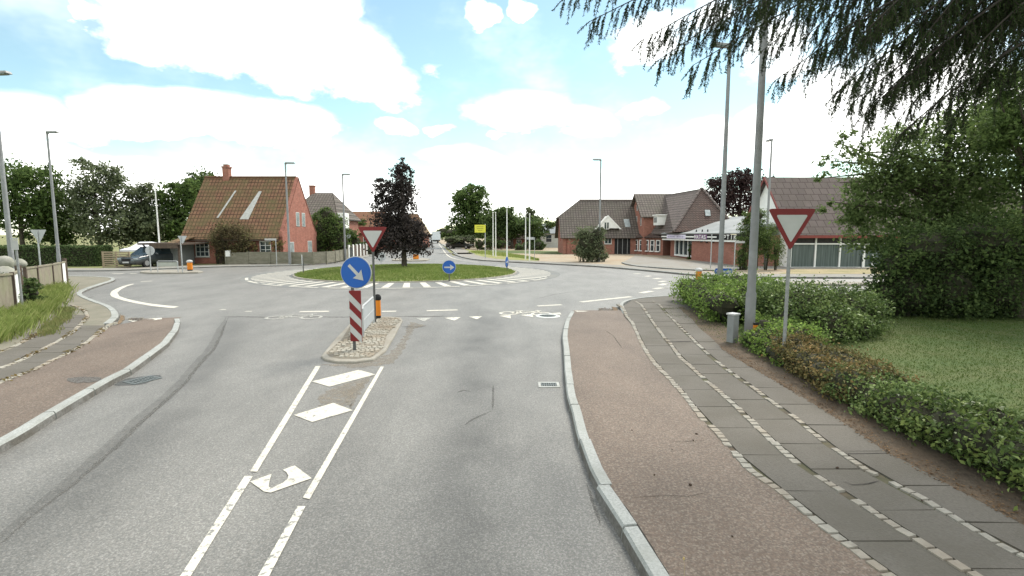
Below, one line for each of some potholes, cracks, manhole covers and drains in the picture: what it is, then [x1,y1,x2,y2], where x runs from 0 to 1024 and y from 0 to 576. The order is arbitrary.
crack [618,492,707,574]
drain grate [123,375,162,385]
